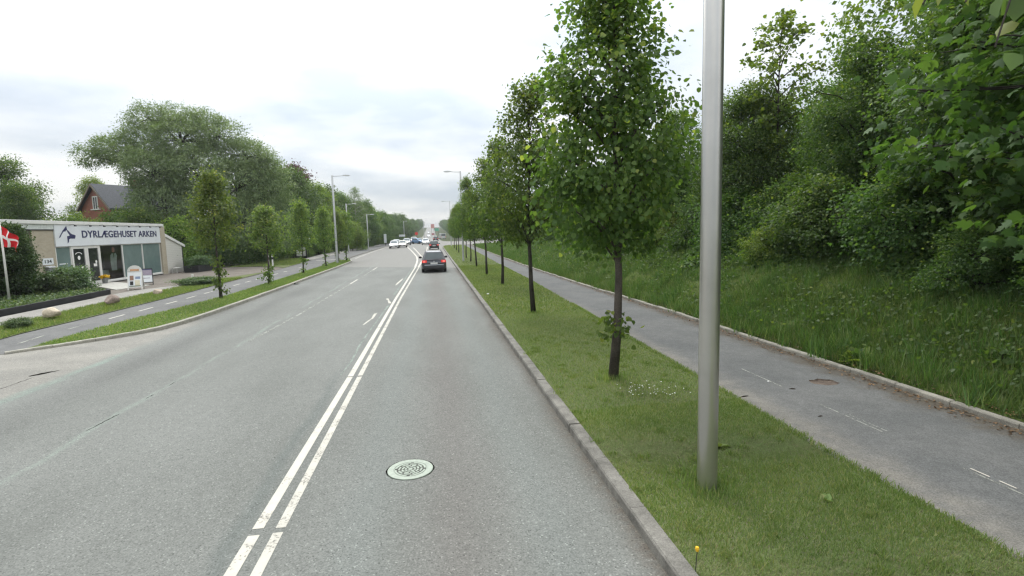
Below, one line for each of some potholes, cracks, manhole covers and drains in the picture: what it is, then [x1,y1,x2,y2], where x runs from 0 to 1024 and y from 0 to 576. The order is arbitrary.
manhole cover [386,459,435,481]
